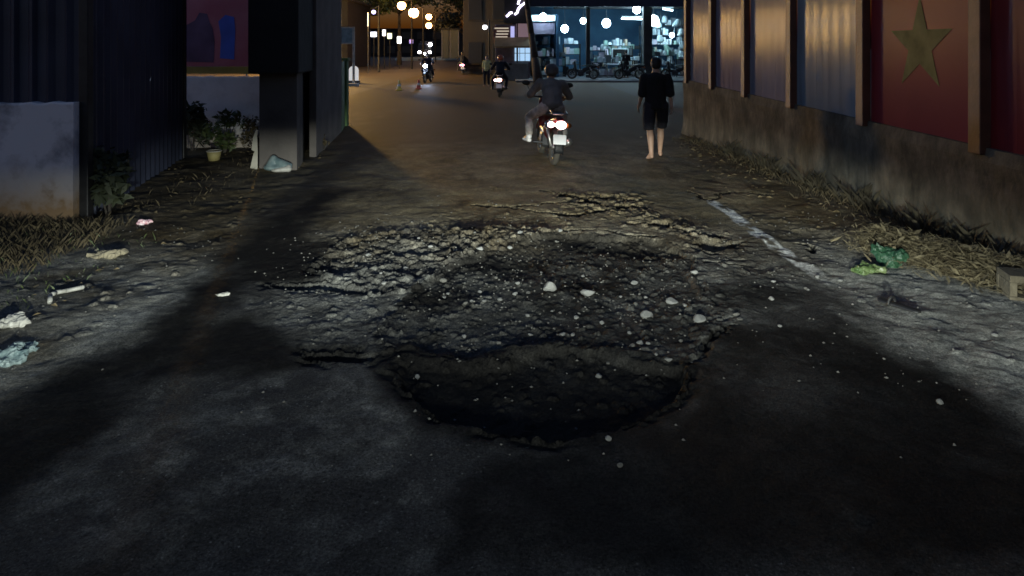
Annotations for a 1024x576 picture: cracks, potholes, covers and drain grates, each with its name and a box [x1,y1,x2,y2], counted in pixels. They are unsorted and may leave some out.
pothole [370,230,728,365]
crack [469,190,725,239]
pothole [263,280,370,296]
pothole [377,344,692,448]
crack [685,190,777,201]
pothole [305,225,491,297]
